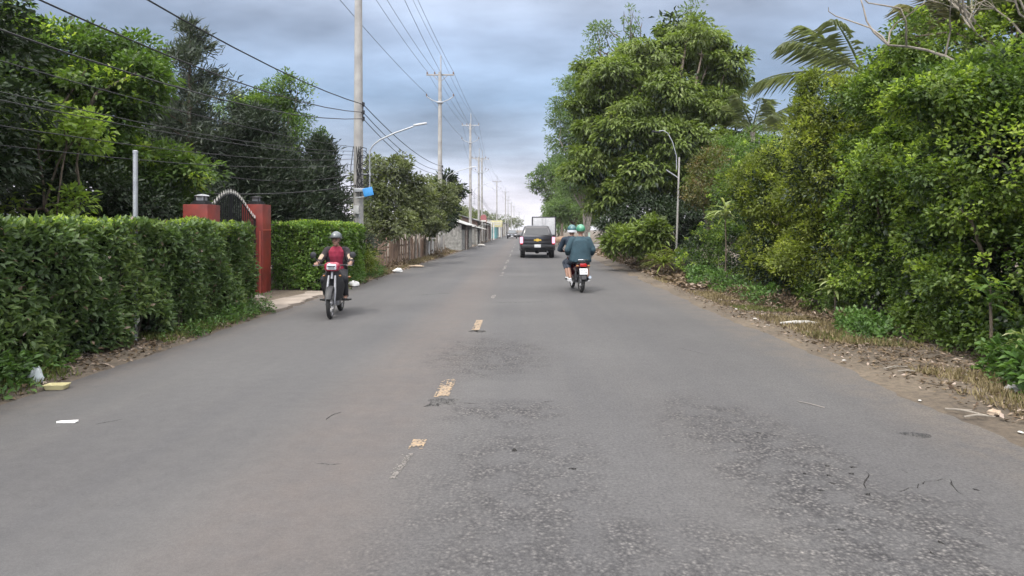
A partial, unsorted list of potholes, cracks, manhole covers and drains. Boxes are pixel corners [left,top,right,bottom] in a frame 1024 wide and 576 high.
crack [863,470,964,495]
pothole [424,398,459,407]
